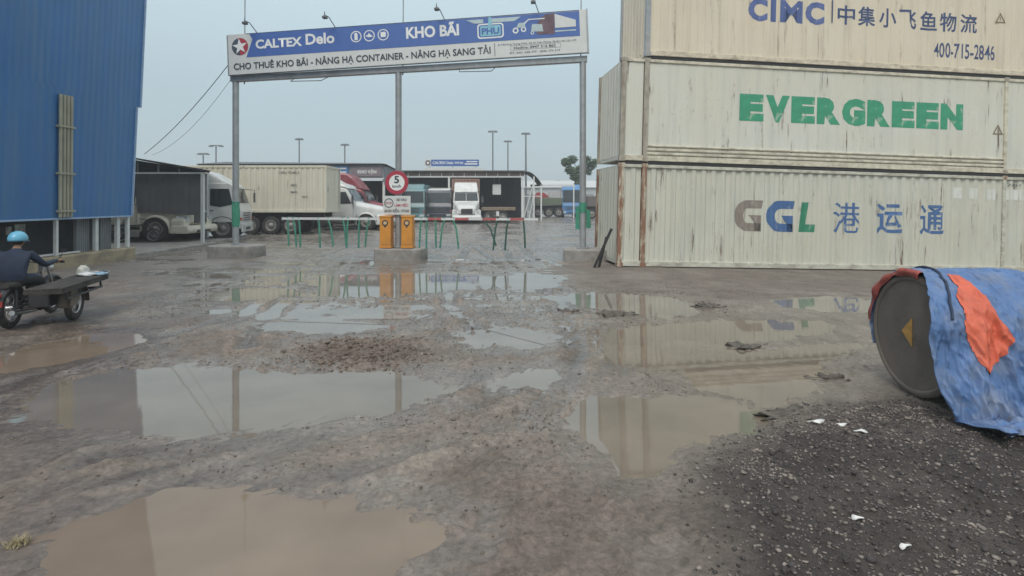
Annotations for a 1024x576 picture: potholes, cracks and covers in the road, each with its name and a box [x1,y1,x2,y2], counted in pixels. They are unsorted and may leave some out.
pothole [541,388,774,485]
pothole [0,329,162,377]
pothole [238,318,403,335]
pothole [589,316,877,409]
pothole [199,286,310,298]
pothole [0,358,464,454]
pothole [311,272,456,299]
pothole [11,472,476,576]
pothole [495,271,569,291]
